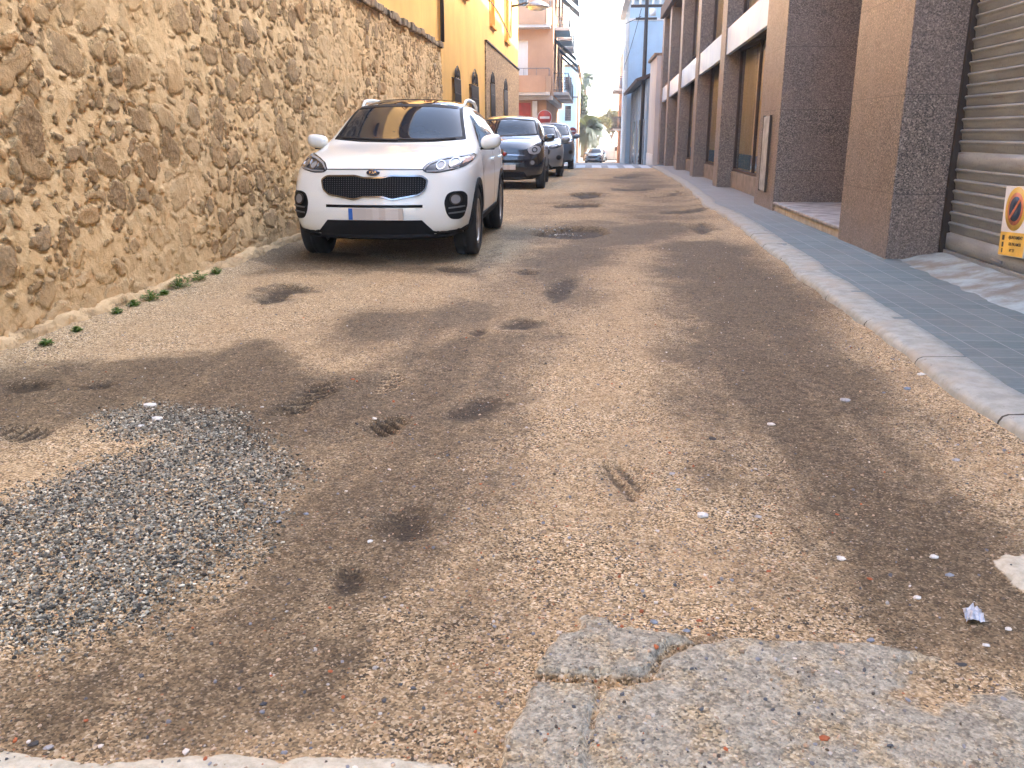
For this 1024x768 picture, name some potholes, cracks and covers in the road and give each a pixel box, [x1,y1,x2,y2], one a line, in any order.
pothole [543,277,578,305]
pothole [0,426,53,443]
pothole [326,567,371,597]
pothole [360,417,412,438]
pothole [531,227,610,240]
pothole [595,461,652,503]
pothole [499,320,543,331]
pothole [263,381,343,420]
pothole [368,509,434,544]
pothole [437,398,510,423]
pothole [251,285,313,305]
